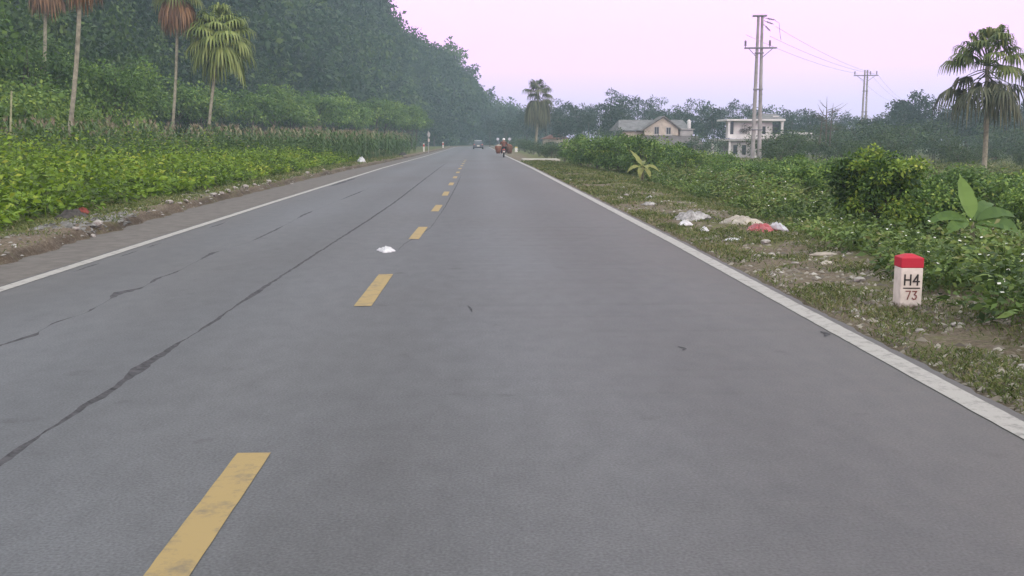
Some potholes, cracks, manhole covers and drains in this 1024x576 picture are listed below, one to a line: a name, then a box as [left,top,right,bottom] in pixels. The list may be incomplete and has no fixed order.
crack [0,166,461,466]
